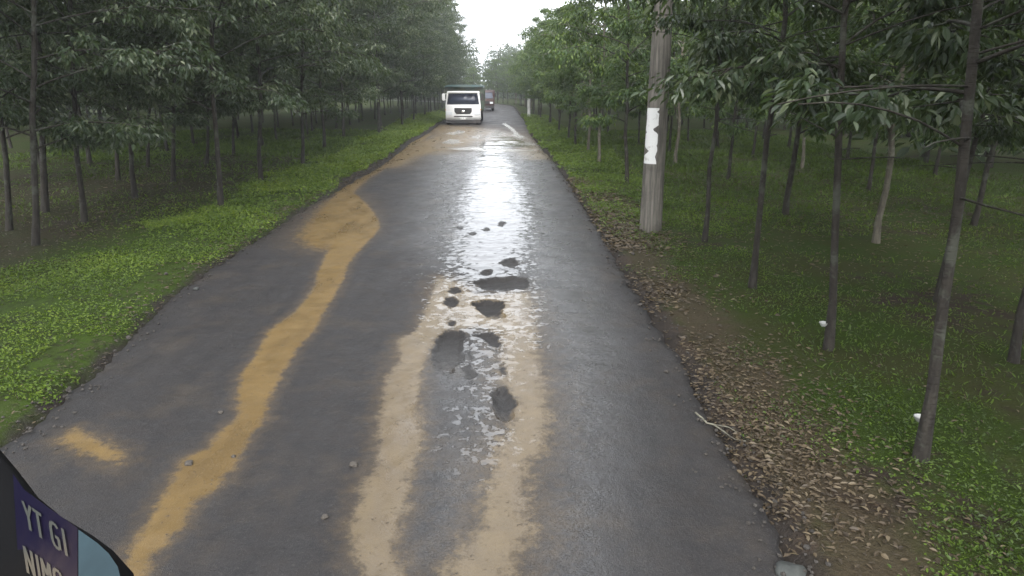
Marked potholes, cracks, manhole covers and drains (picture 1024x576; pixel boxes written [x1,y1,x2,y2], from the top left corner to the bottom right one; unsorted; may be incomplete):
pothole [489,386,519,423]
pothole [473,276,530,291]
pothole [475,332,504,354]
pothole [498,258,519,268]
pothole [442,296,459,309]
pothole [470,299,507,320]
pothole [429,329,466,377]
